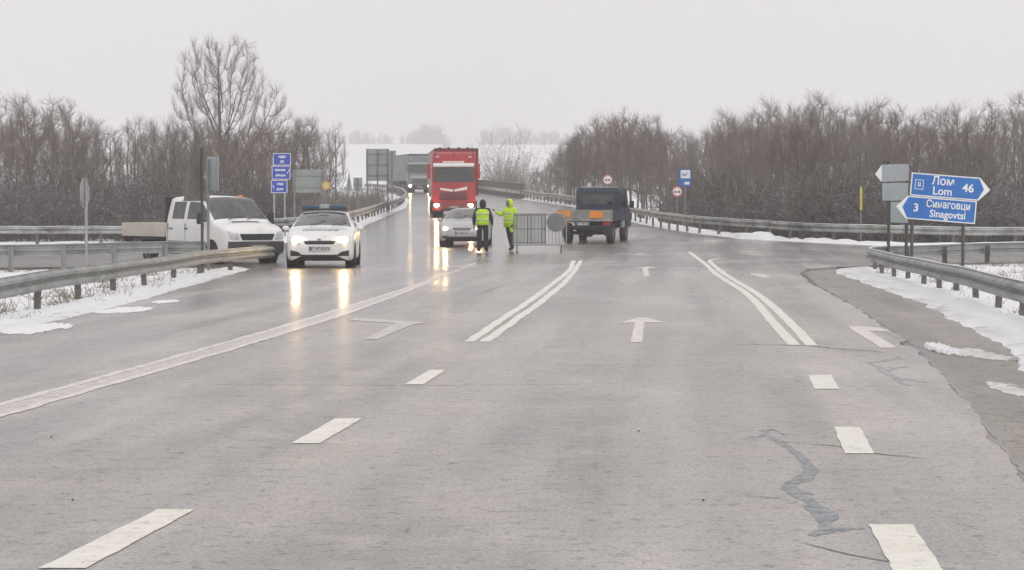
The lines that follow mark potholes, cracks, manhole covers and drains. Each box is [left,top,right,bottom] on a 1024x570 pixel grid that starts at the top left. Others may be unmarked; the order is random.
crack [753,326,910,353]
crack [796,540,960,570]
